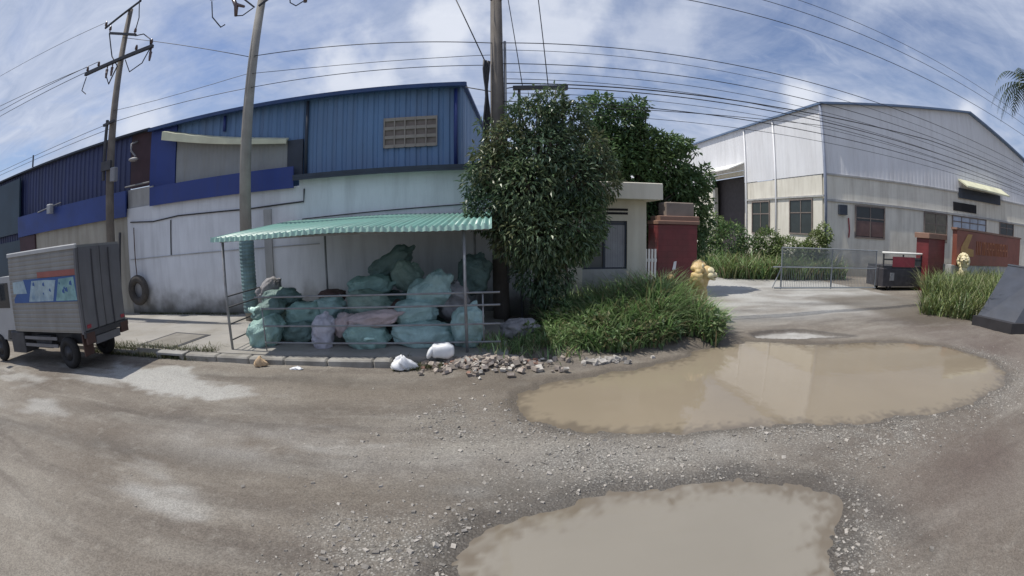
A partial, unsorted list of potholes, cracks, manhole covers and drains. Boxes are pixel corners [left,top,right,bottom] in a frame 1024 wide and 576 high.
pothole [749,329,857,339]
pothole [503,334,1015,440]
pothole [429,469,858,576]
